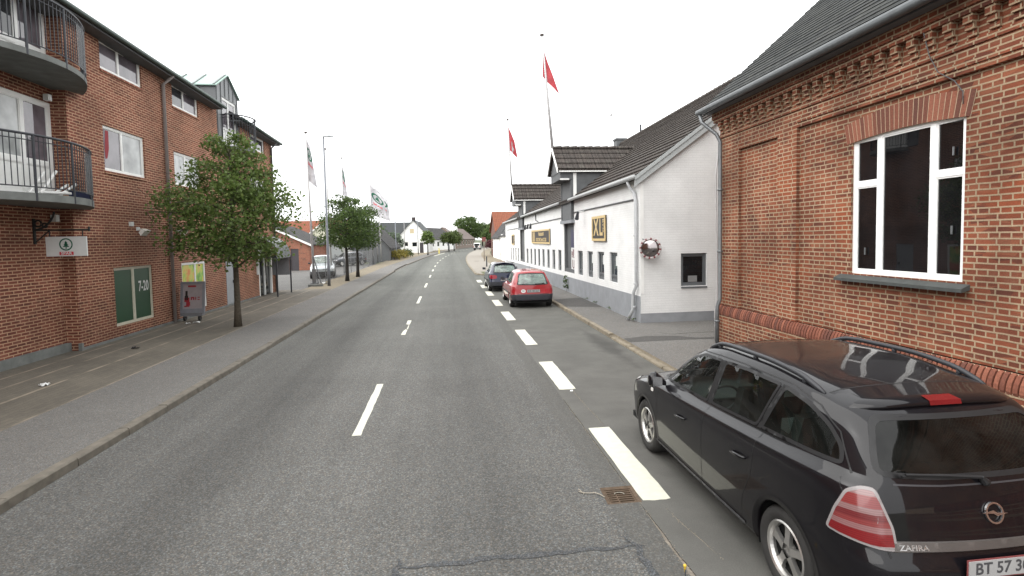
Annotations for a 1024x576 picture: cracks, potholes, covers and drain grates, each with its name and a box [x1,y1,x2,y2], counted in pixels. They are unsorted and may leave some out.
drain grate [600,485,642,505]
